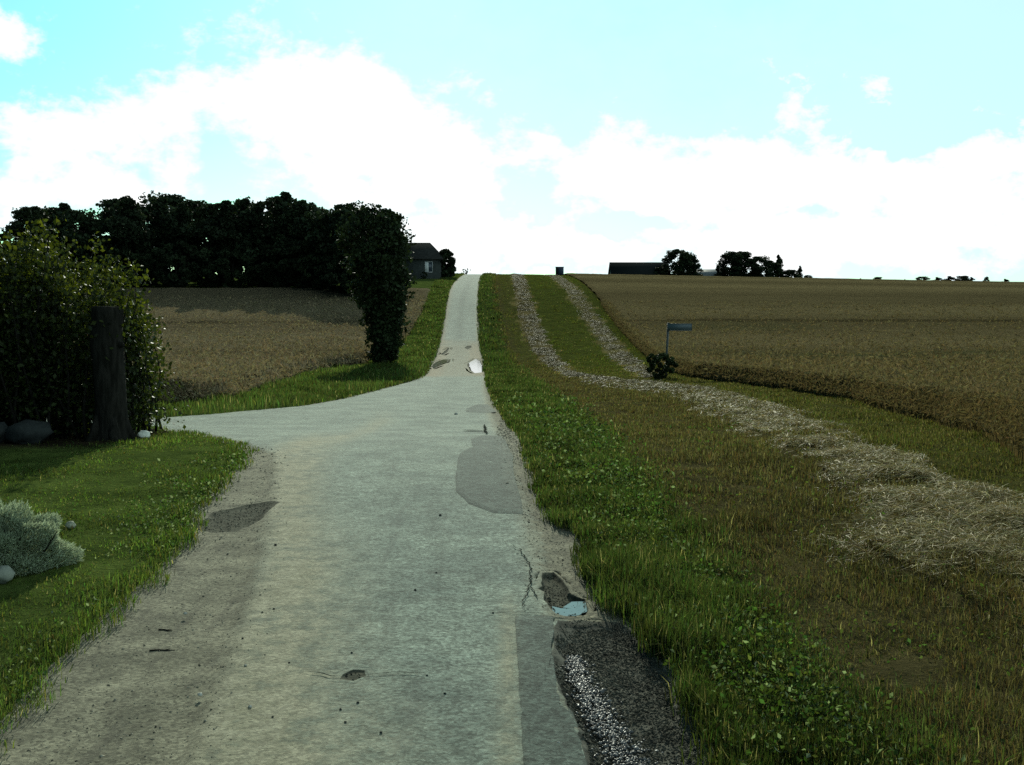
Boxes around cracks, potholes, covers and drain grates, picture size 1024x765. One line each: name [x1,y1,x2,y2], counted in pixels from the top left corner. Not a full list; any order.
crack [490,545,544,613]
pothole [332,667,374,685]
pothole [461,358,484,373]
pothole [530,571,595,620]
pothole [429,358,453,369]
